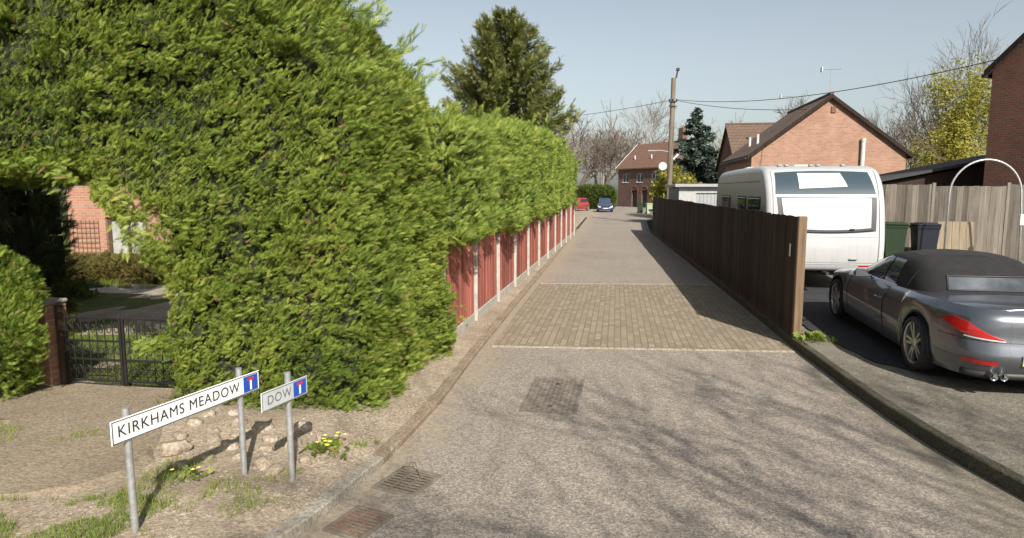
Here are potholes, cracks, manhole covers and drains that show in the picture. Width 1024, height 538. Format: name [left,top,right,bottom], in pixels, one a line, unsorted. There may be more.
drain grate [371,466,442,498]
manhole cover [518,376,585,416]
drain grate [322,505,394,538]
